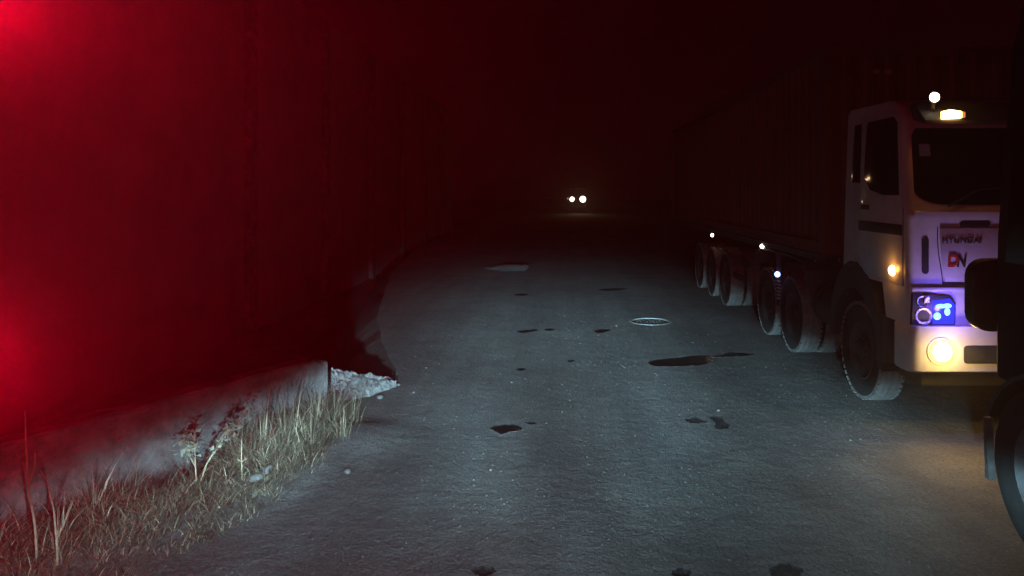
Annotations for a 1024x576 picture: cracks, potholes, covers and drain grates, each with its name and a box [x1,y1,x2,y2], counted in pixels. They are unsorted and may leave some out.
pothole [489,424,525,435]
pothole [710,415,730,429]
manhole cover [629,317,672,325]
pothole [471,565,497,576]
pothole [648,351,755,367]
pothole [767,563,804,576]
